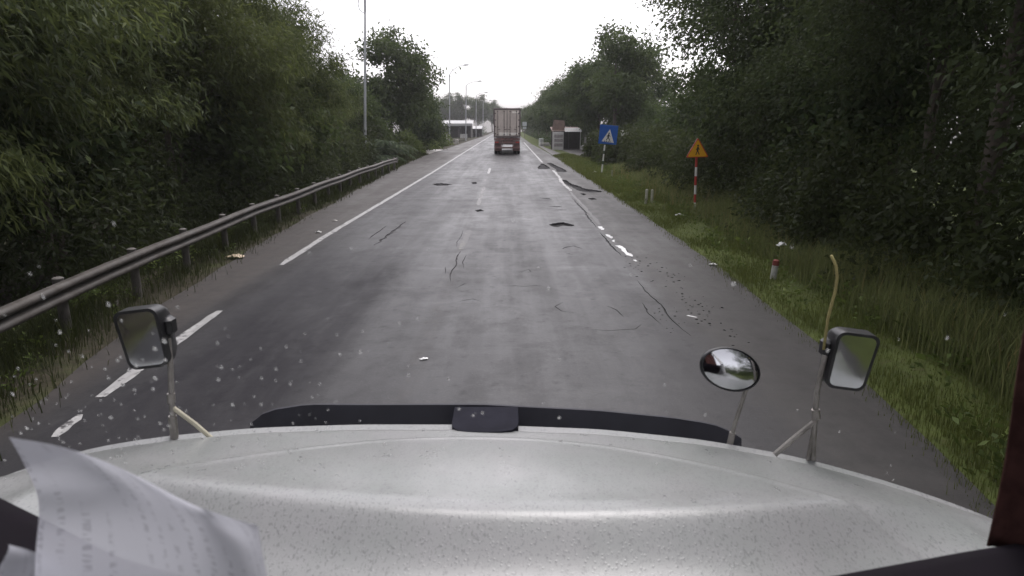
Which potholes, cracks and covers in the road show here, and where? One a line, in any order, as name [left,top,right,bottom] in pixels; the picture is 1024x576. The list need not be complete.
crack [445,231,475,301]
crack [543,198,750,346]
crack [368,221,406,246]
pothole [562,180,603,192]
